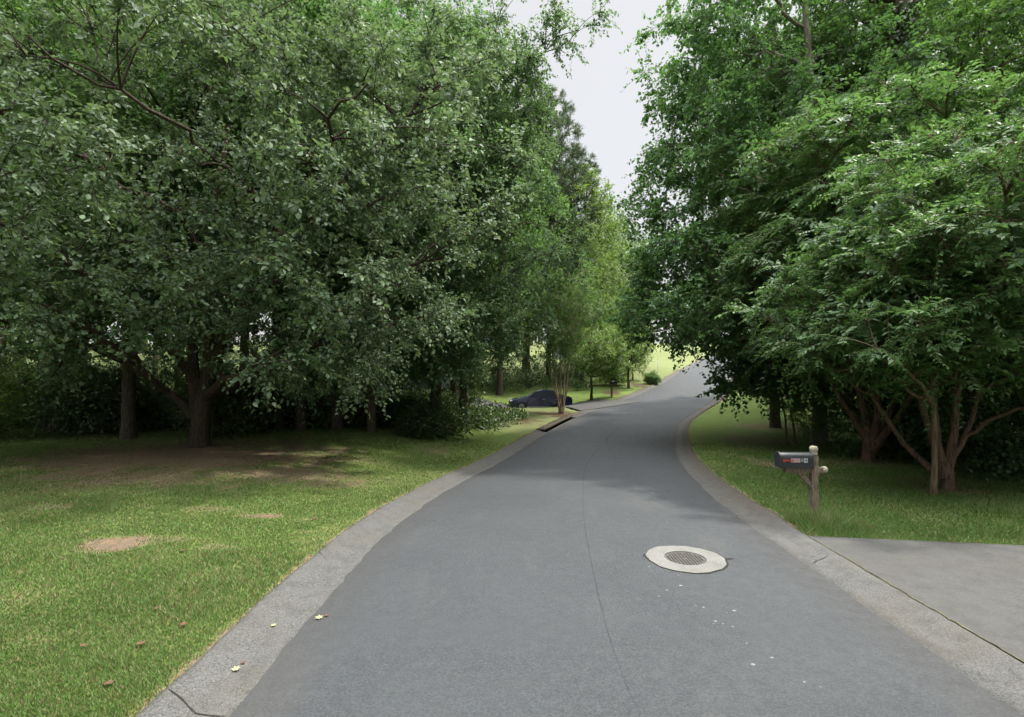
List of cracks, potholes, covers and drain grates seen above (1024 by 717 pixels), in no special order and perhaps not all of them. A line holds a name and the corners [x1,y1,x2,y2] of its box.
crack [169,689,221,716]
drain grate [536,415,574,432]
manhole cover [645,546,726,573]
